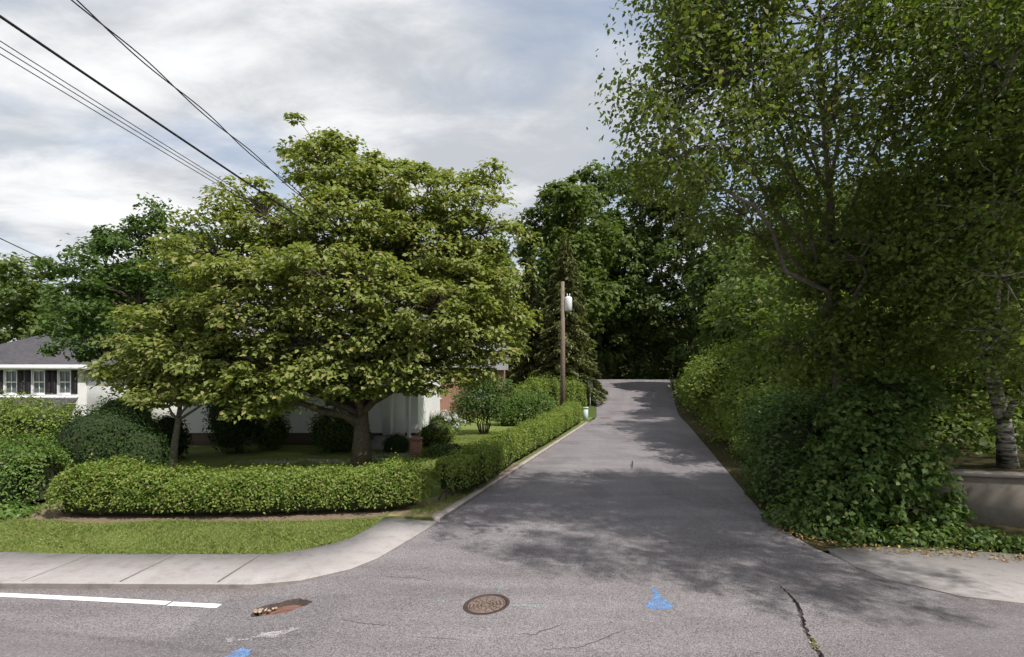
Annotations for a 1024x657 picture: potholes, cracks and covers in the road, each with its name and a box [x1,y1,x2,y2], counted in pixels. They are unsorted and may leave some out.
pothole [251,598,312,617]
crack [518,624,627,650]
manhole cover [463,594,510,615]
crack [779,585,824,657]
